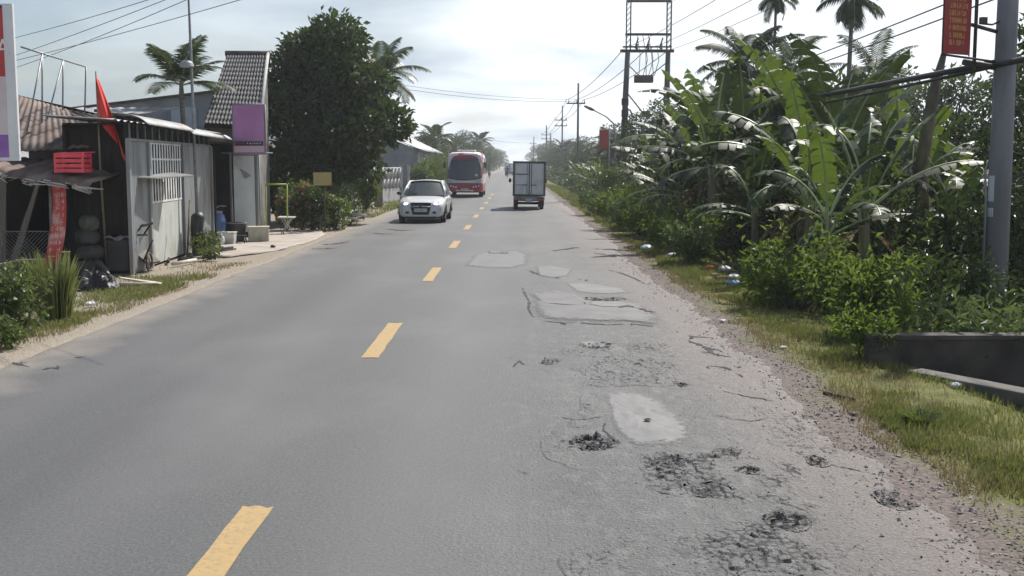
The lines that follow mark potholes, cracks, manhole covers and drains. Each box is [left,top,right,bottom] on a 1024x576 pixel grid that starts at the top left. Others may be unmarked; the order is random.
pothole [760,508,813,532]
pothole [644,451,684,470]
pothole [805,455,831,468]
pothole [711,446,745,457]
pothole [734,464,764,474]
pothole [681,483,733,499]
pothole [869,487,922,511]
crack [499,271,885,576]
pothole [560,431,620,452]
